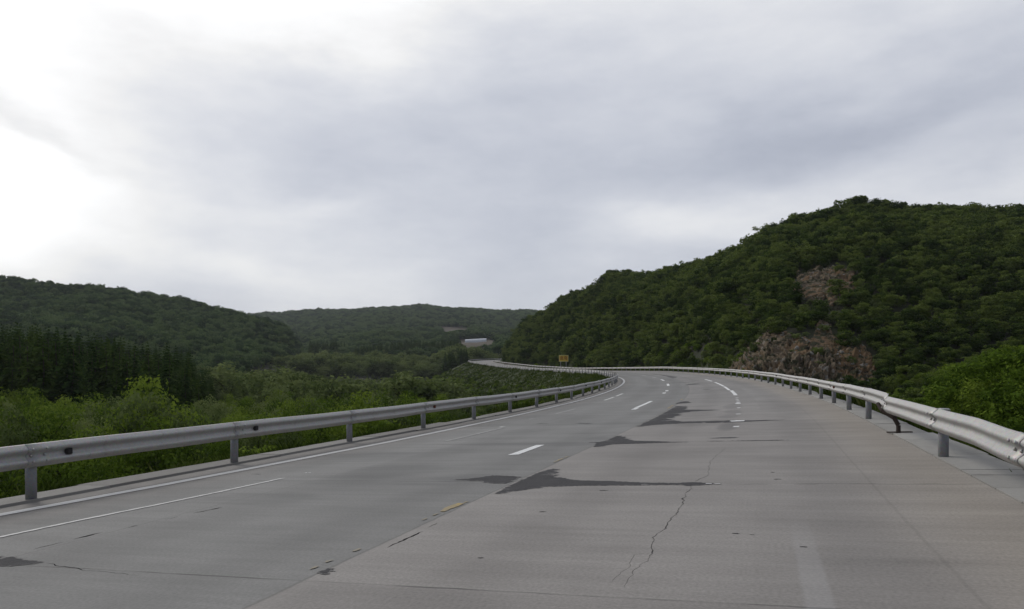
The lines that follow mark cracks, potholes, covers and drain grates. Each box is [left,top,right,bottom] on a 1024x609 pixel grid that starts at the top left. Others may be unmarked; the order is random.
crack [36,507,221,575]
crack [613,460,711,587]
